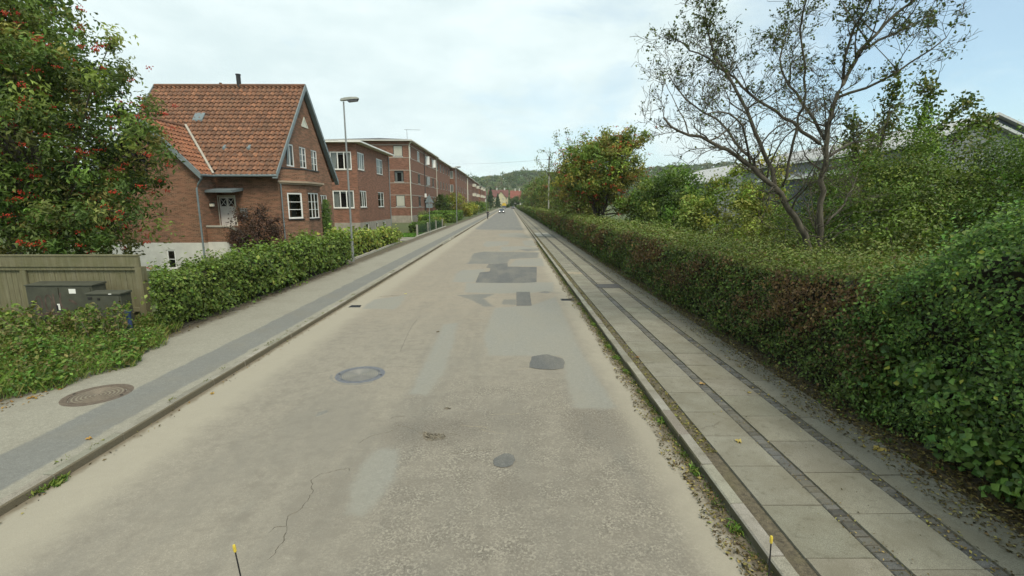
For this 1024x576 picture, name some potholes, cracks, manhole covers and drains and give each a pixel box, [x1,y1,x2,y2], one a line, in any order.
crack [269,468,350,559]
manhole cover [59,384,134,407]
pothole [419,431,446,442]
manhole cover [335,366,385,383]
